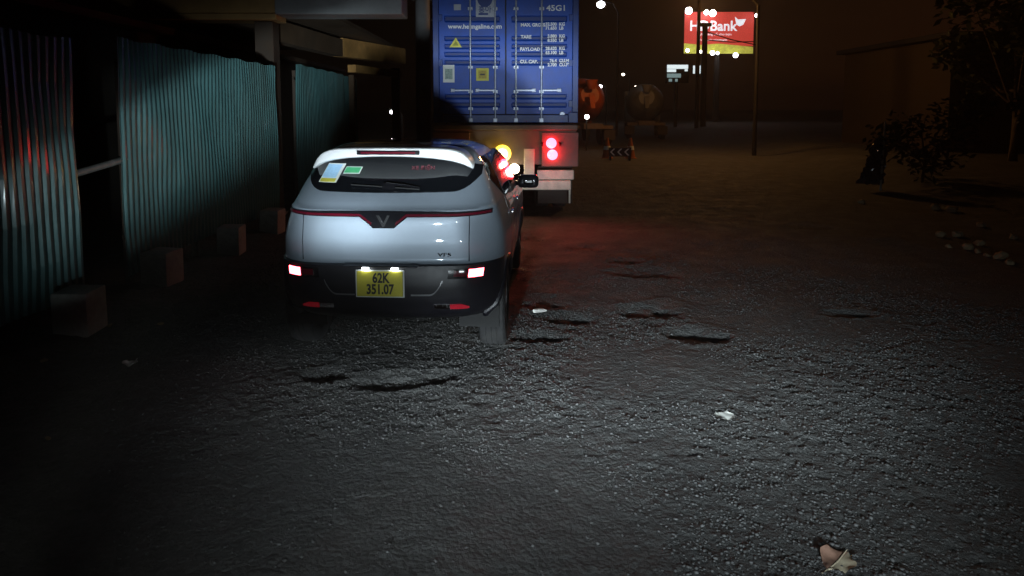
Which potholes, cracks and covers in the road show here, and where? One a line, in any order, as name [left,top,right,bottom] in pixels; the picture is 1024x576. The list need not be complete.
pothole [658,323,735,345]
pothole [505,328,576,344]
pothole [539,310,602,326]
pothole [293,365,365,384]
pothole [329,368,466,392]
pothole [598,265,683,282]
pothole [615,298,690,320]
pothole [817,308,884,319]
